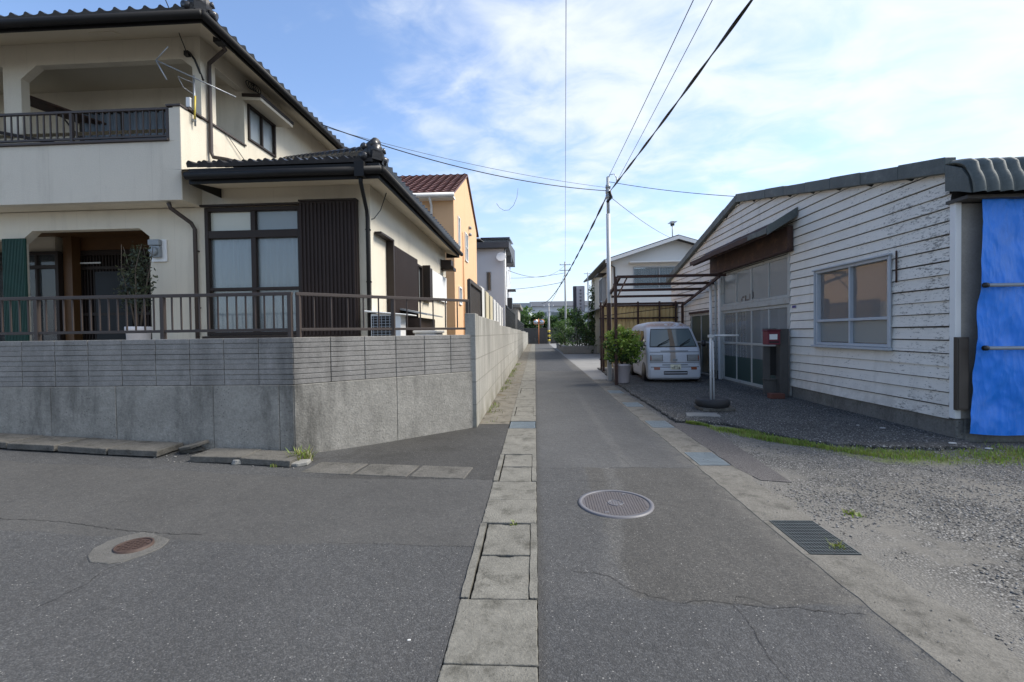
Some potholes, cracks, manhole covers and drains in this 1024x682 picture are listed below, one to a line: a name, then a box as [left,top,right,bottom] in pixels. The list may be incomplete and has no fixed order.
manhole cover [112,537,155,554]
manhole cover [578,490,654,519]
drain grate [769,520,861,555]
crack [573,570,869,680]
